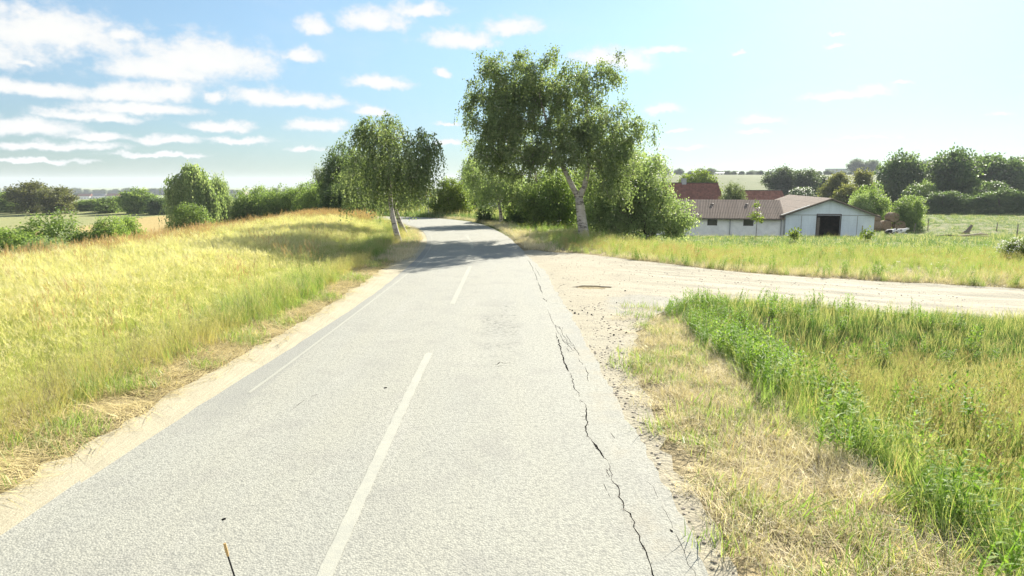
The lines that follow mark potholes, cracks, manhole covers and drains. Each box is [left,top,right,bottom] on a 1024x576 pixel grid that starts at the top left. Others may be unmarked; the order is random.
crack [528,261,696,576]
